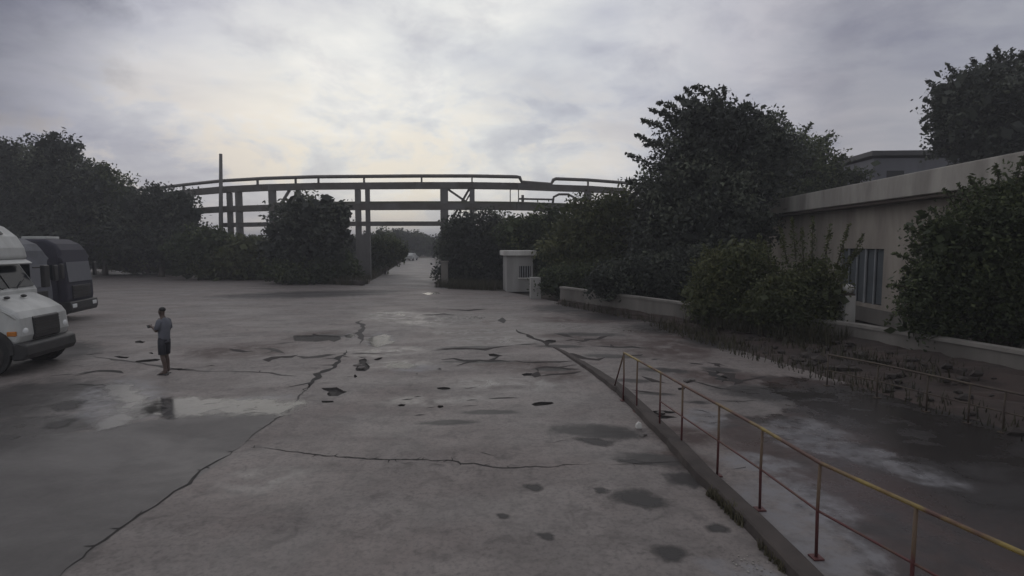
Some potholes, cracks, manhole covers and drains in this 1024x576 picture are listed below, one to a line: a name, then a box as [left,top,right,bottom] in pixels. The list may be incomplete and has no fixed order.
pothole [322,387,346,396]
pothole [293,334,341,342]
crack [433,344,665,392]
crack [53,320,592,468]
